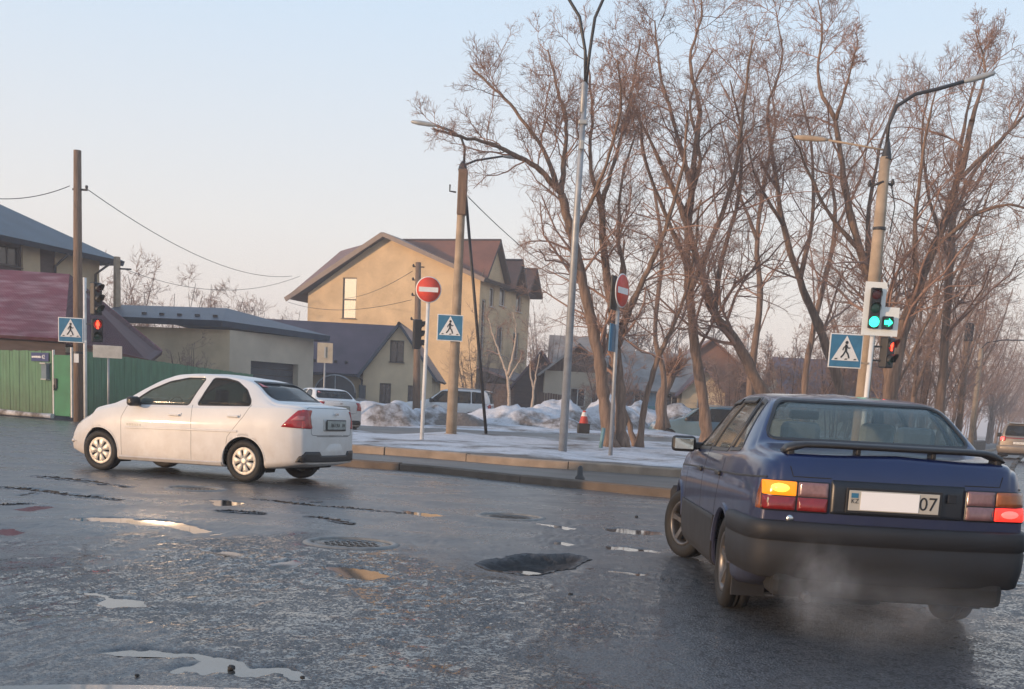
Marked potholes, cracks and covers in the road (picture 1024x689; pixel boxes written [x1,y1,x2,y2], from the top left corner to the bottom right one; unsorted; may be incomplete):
manhole cover [475,512,546,521]
crack [215,498,405,525]
crack [0,476,128,506]
pothole [475,553,592,576]
